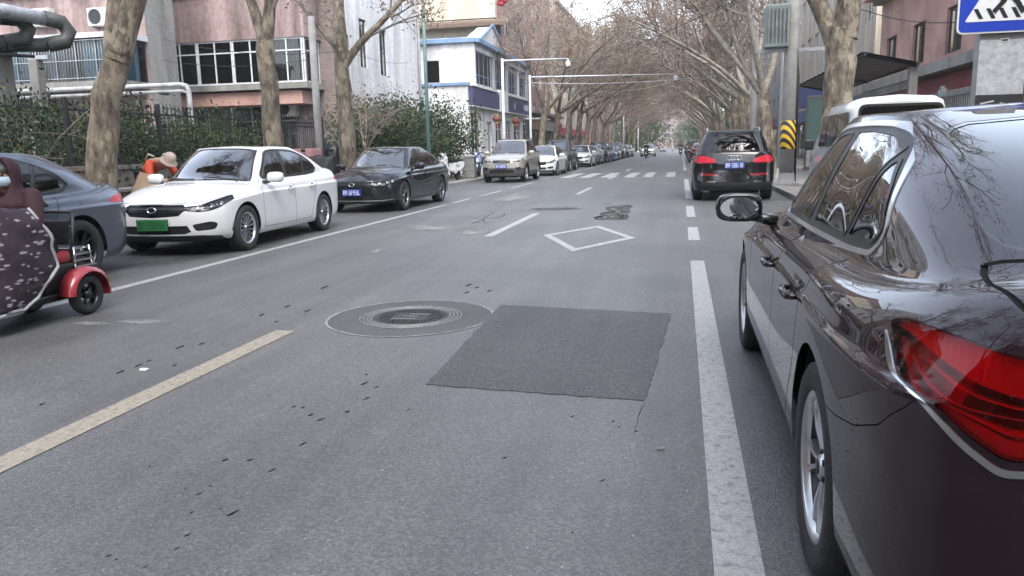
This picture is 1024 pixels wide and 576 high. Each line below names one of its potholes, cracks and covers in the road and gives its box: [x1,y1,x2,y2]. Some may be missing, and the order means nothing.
manhole cover [325,300,493,337]
pothole [593,205,633,220]
